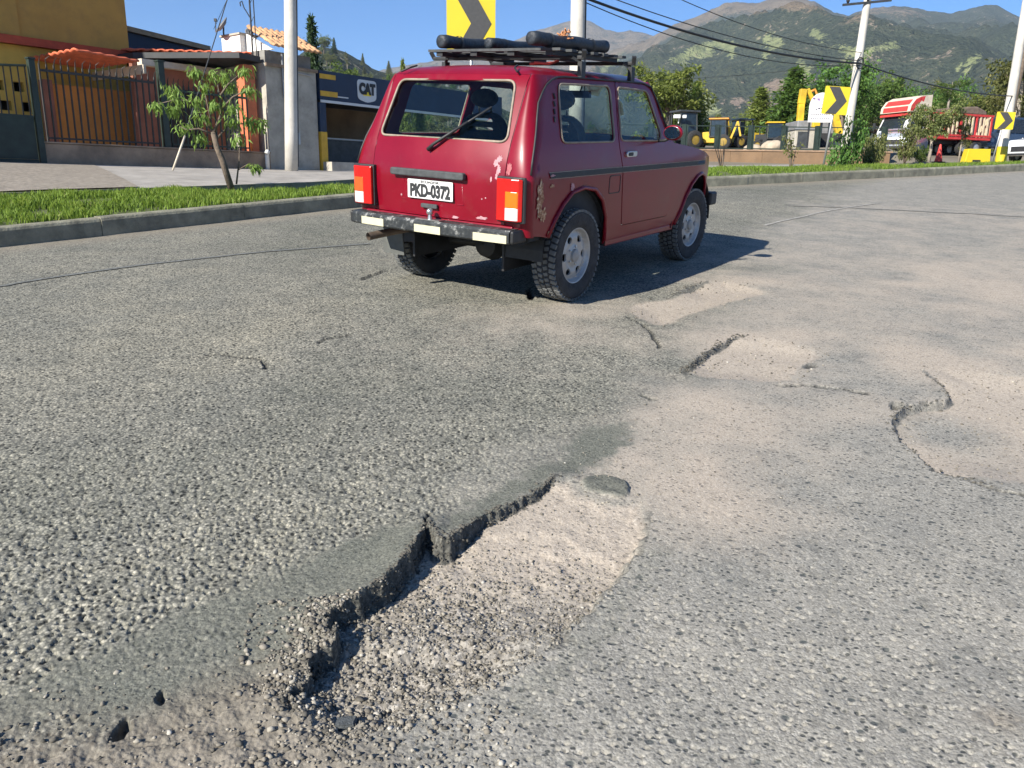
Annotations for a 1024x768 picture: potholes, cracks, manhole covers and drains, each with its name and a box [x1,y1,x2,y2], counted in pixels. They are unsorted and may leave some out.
pothole [618,279,776,329]
crack [631,319,663,349]
pothole [280,472,654,753]
